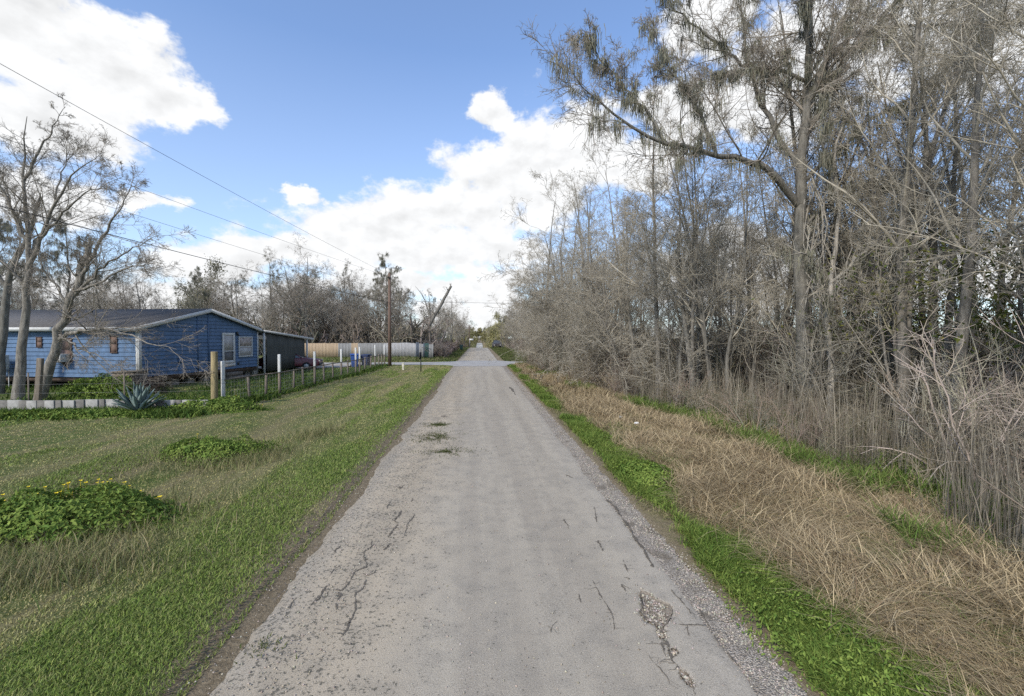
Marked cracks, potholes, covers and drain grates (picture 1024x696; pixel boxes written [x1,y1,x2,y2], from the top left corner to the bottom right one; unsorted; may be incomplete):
crack [274,486,415,635]
crack [578,499,654,629]
crack [646,589,739,687]
pothole [633,583,680,637]
